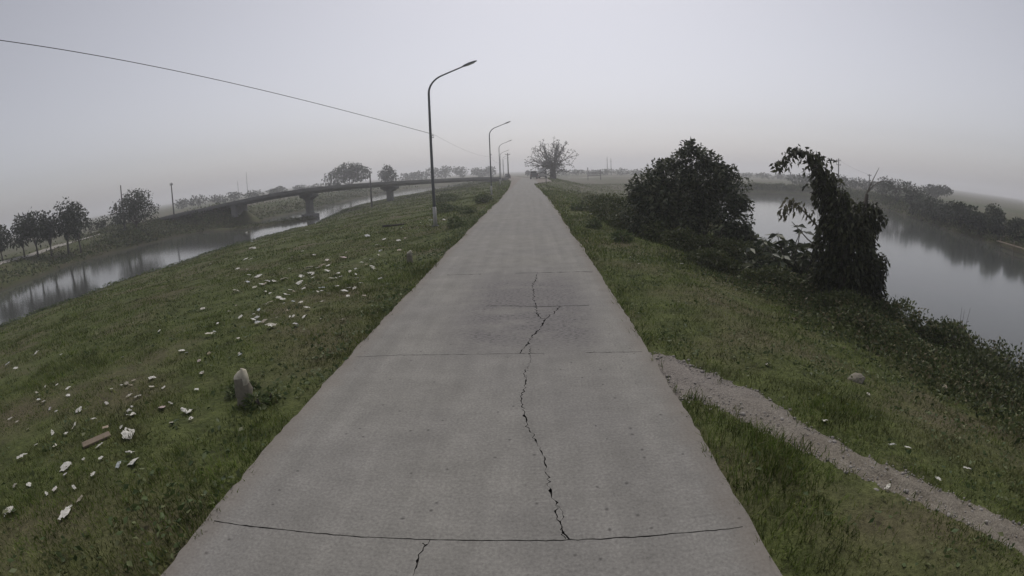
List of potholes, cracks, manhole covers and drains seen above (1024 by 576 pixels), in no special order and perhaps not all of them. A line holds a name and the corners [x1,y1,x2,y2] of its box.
crack [519,274,573,540]
crack [413,539,431,575]
